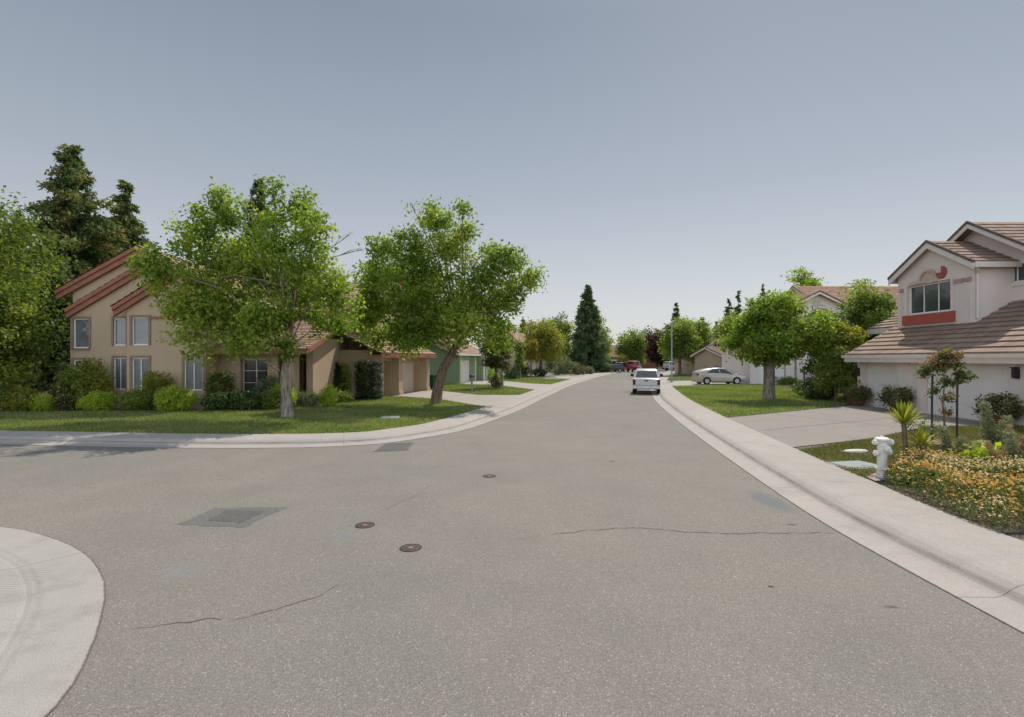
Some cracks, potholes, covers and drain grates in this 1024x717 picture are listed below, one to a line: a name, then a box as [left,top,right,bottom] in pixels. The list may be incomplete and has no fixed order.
crack [233,584,345,620]
manhole cover [399,544,422,552]
